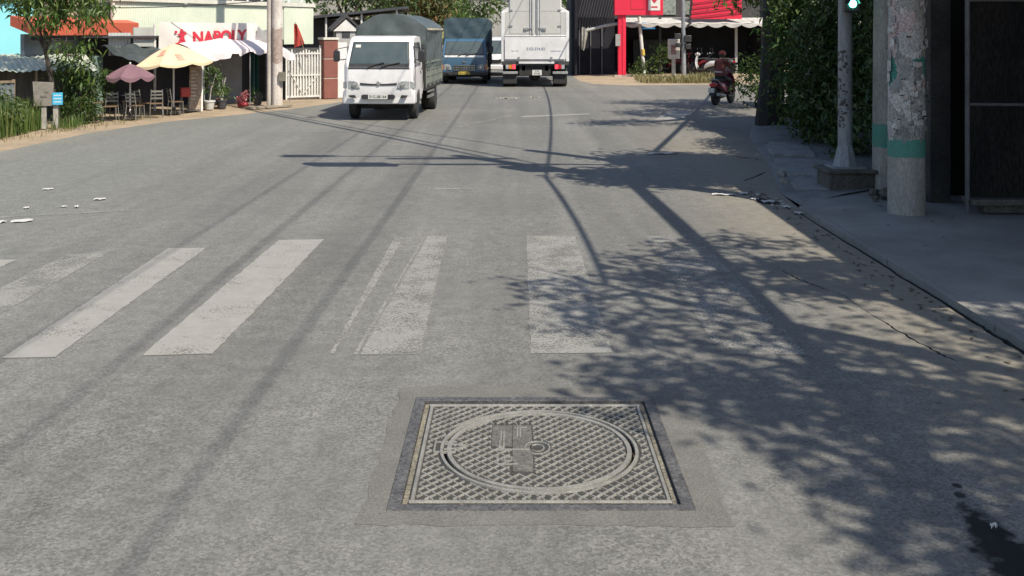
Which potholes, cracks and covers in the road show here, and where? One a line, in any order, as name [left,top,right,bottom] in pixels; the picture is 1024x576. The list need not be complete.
manhole cover [355,385,734,528]
crack [782,270,956,361]
